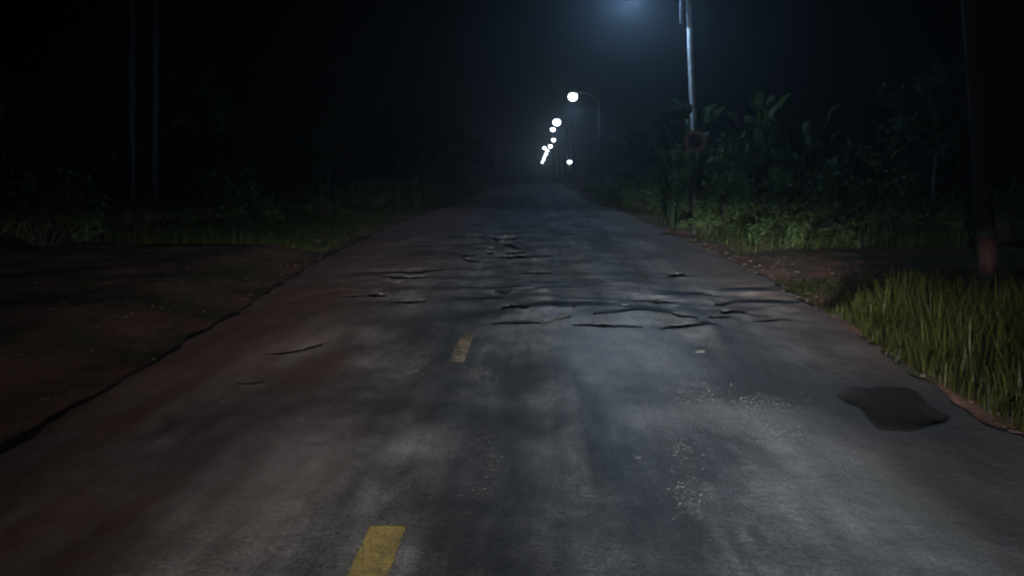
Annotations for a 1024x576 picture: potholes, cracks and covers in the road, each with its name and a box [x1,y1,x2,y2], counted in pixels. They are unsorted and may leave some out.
crack [272,343,323,355]
